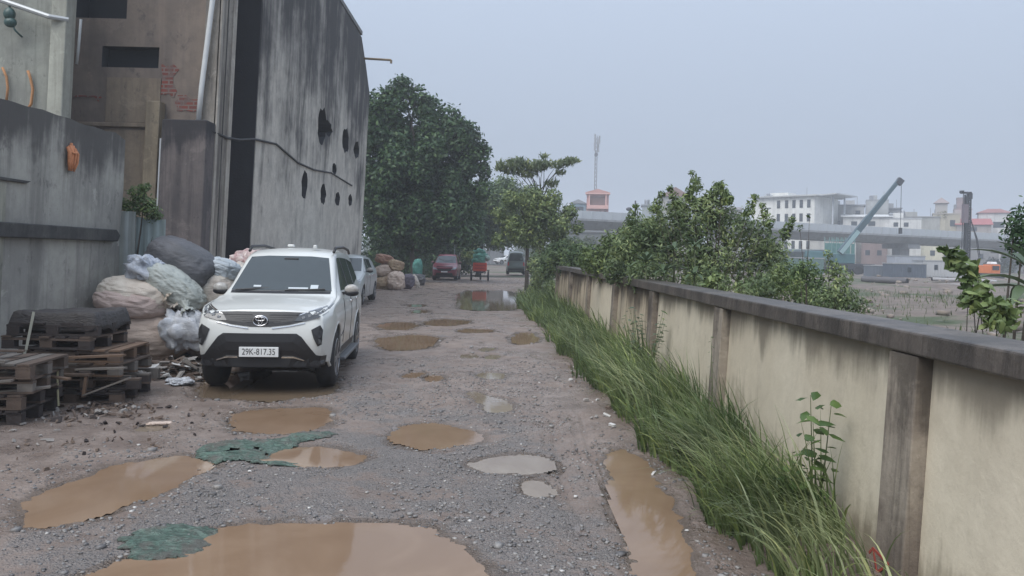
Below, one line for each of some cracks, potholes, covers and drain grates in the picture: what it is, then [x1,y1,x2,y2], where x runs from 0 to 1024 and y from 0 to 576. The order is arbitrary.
pothole [369,321,426,330]
pothole [447,290,518,311]
pothole [375,420,506,454]
pothole [366,333,446,351]
pothole [394,370,430,378]
pothole [512,476,562,498]
pothole [595,445,722,576]
pothole [214,402,347,437]
pothole [459,388,521,413]
pothole [419,374,451,382]
pothole [456,448,568,477]
pothole [249,442,379,469]
